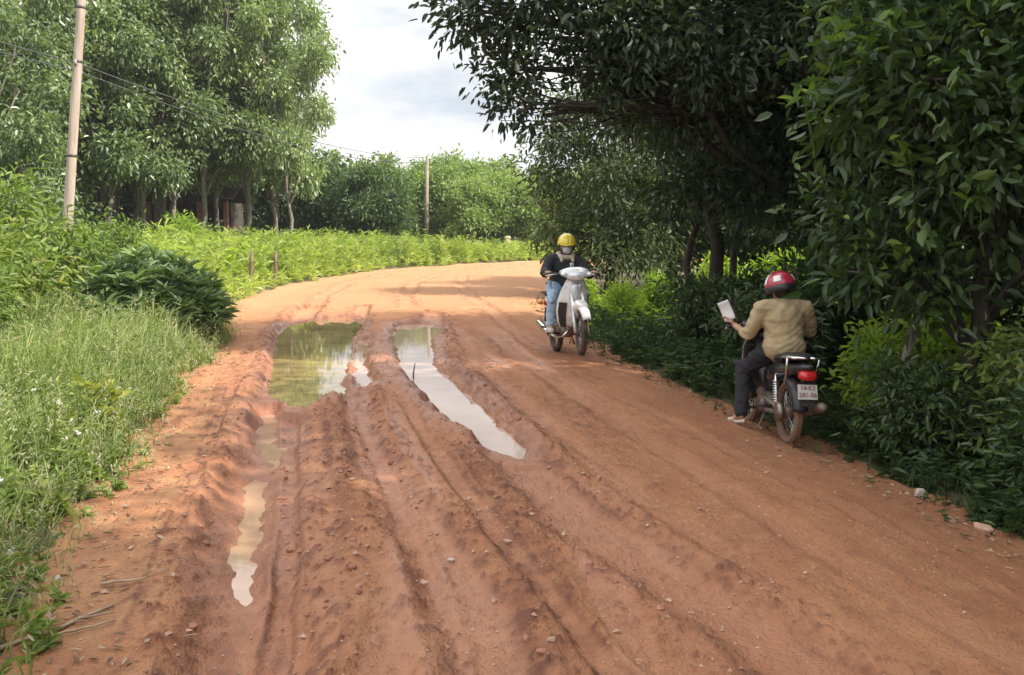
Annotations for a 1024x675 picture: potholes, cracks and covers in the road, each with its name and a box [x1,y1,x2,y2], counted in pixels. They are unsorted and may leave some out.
pothole [381,318,541,462]
pothole [191,465,292,620]
pothole [258,312,370,409]
pothole [235,396,304,473]
